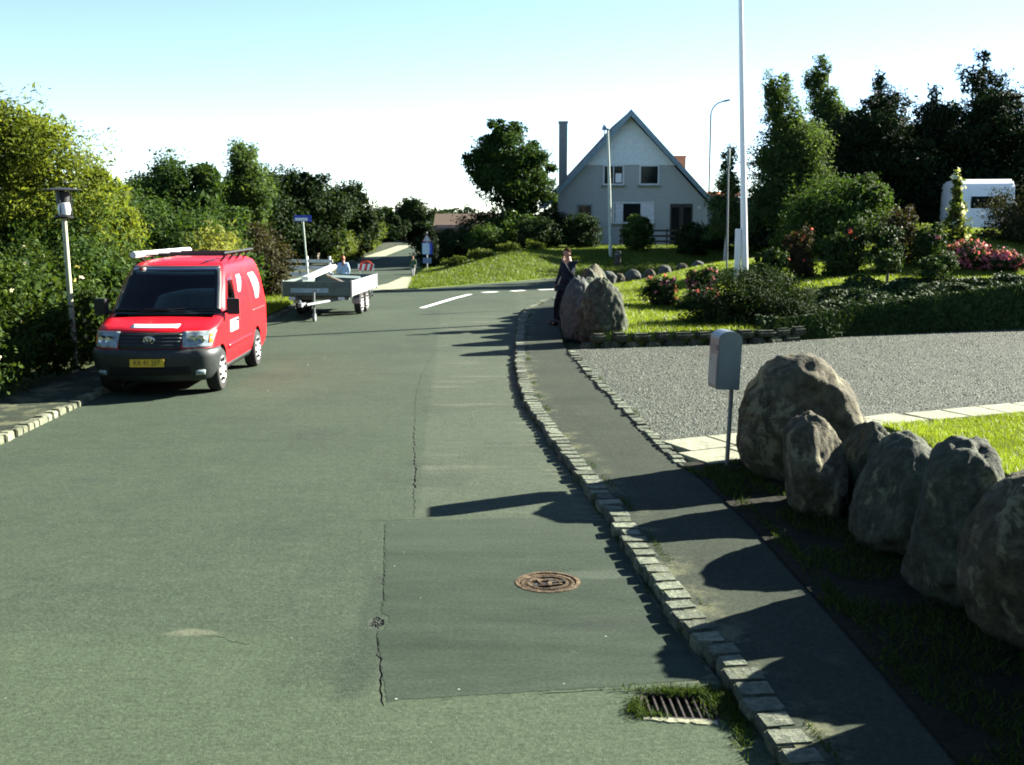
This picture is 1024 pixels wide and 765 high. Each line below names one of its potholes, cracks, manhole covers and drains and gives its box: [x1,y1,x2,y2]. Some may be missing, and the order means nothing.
crack [368,353,448,706]
drain grate [639,692,724,726]
pothole [368,617,385,629]
manhole cover [515,571,580,593]
